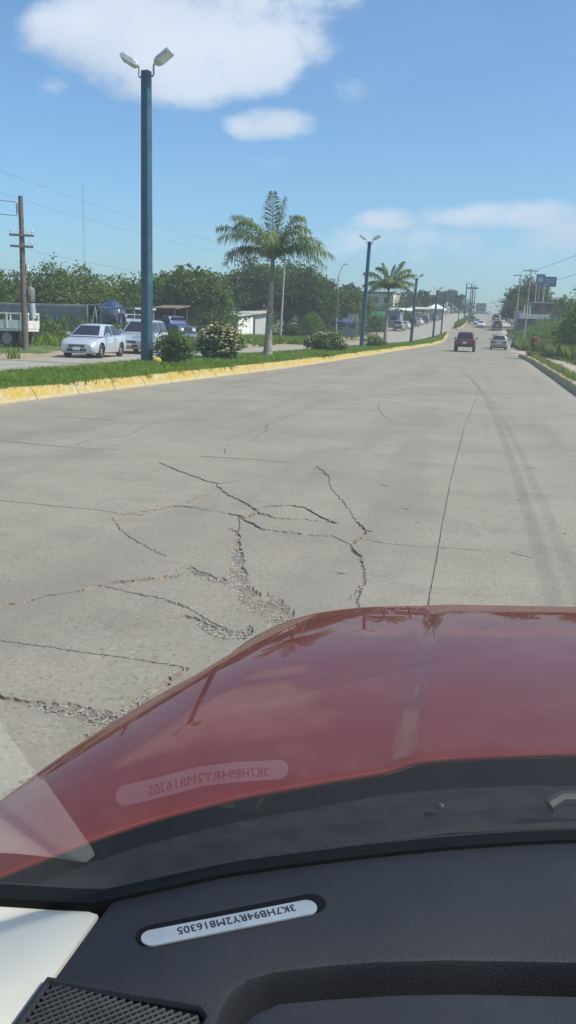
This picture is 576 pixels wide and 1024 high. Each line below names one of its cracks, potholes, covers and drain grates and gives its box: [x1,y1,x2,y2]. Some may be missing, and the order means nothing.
crack [0,416,482,796]
